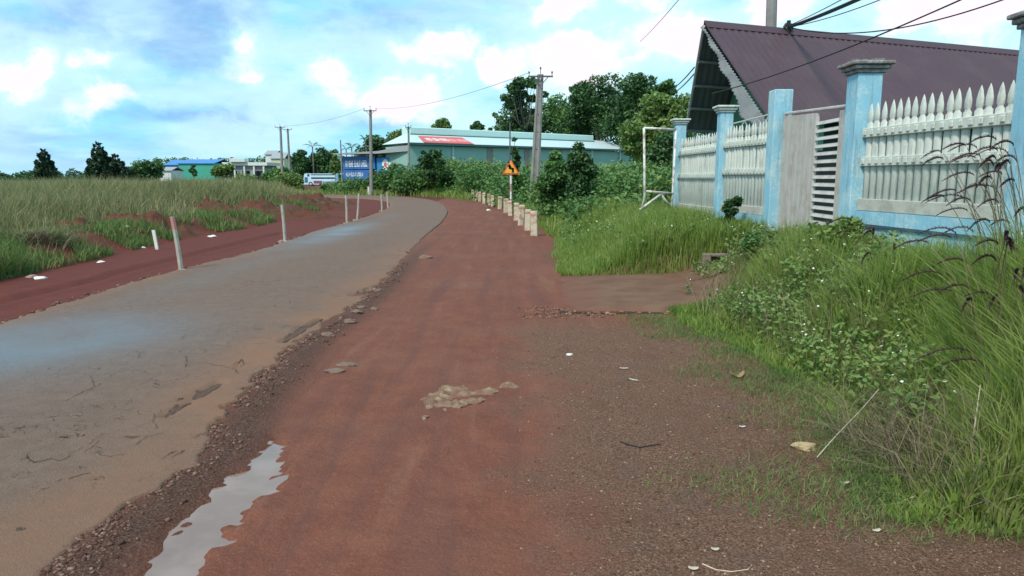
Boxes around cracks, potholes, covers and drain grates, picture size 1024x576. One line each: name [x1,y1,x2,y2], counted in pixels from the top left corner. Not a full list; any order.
pothole [164,403,190,417]
pothole [282,319,322,343]
pothole [192,384,222,399]
crack [185,325,297,371]
crack [24,376,164,481]
